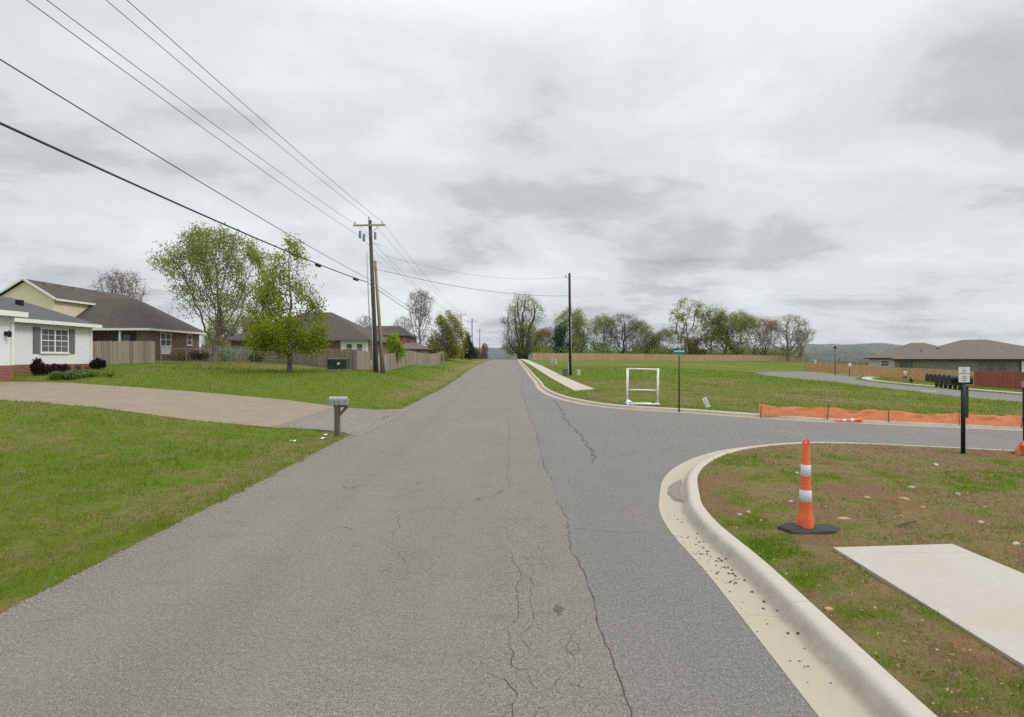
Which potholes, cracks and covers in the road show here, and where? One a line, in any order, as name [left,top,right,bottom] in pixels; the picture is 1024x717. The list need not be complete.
crack [498,551,632,717]
